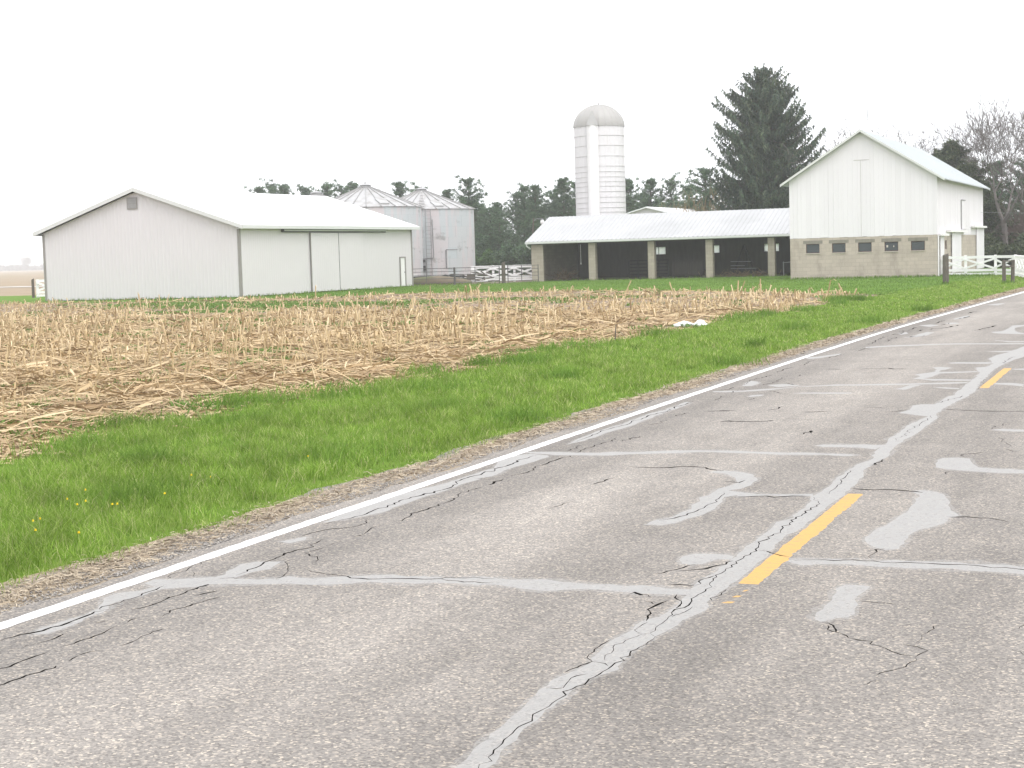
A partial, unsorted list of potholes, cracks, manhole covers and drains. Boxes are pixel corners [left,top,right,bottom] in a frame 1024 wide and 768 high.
crack [865,625,940,685]
crack [399,305,1001,522]
crack [302,519,373,561]
crack [0,586,218,685]
